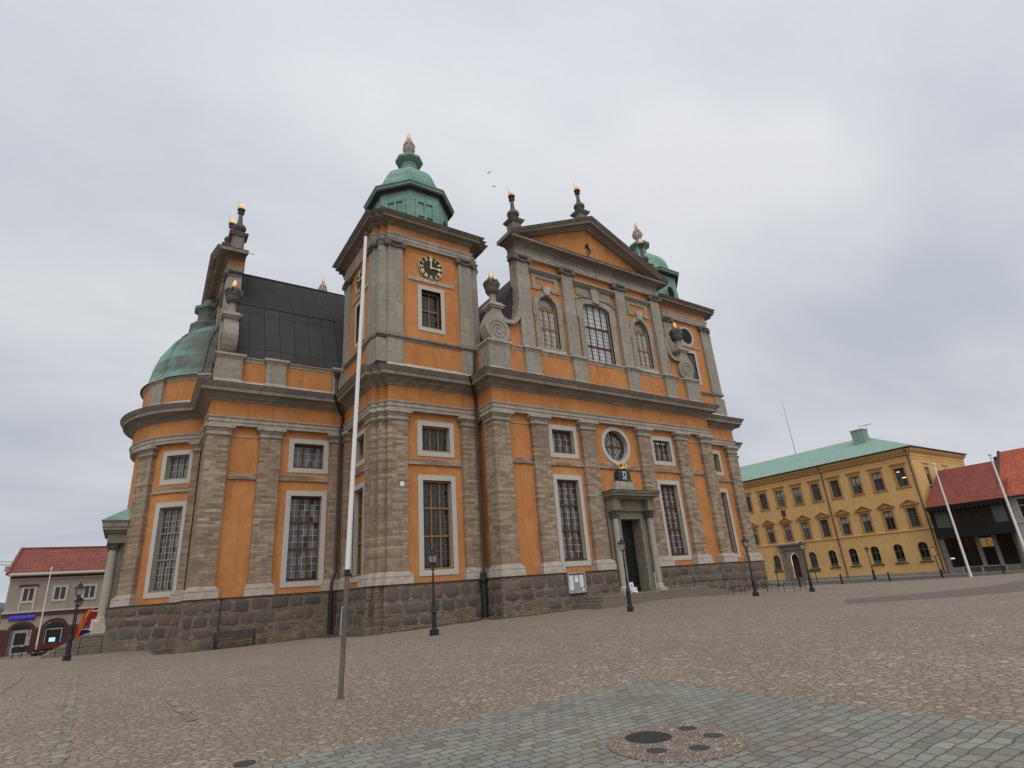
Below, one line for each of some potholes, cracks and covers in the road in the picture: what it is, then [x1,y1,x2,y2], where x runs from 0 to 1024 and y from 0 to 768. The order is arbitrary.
manhole cover [625,731,672,744]
